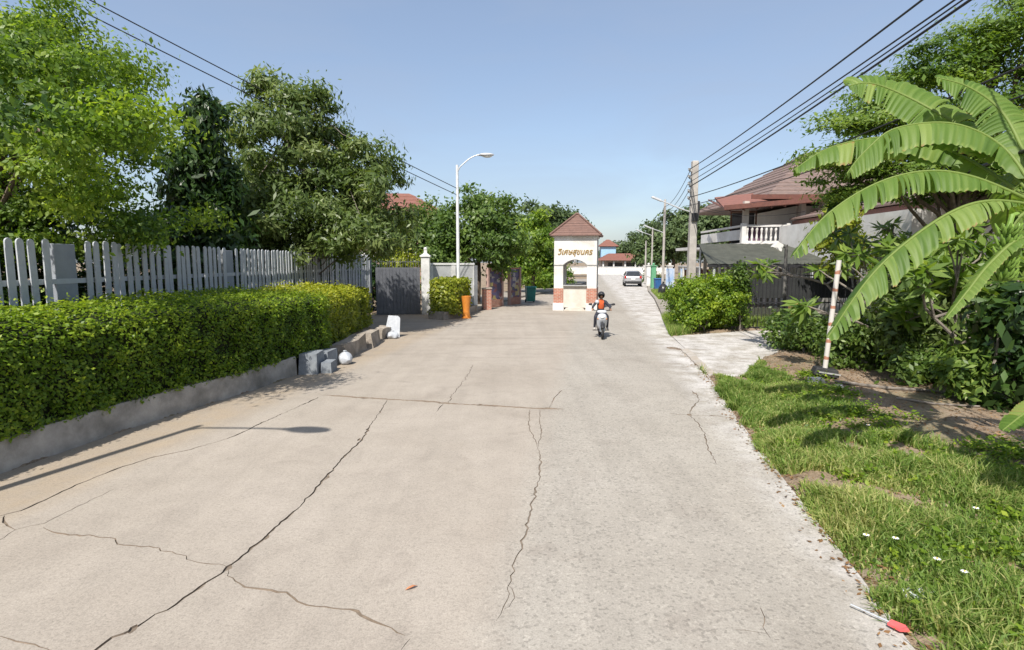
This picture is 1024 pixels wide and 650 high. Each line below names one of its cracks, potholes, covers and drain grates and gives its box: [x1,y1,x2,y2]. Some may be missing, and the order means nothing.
crack [0,401,410,650]
crack [670,390,728,462]
crack [498,391,561,618]
